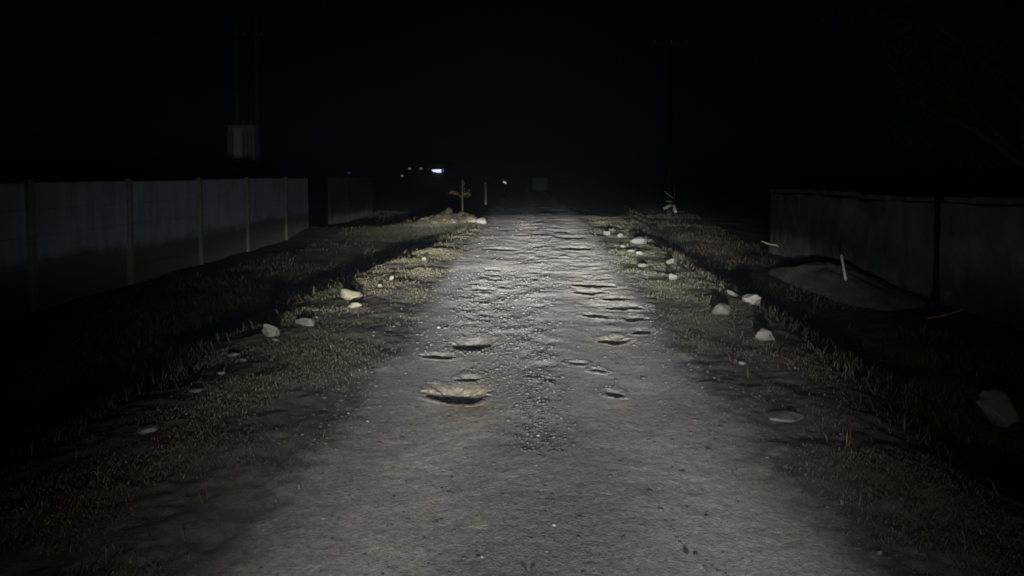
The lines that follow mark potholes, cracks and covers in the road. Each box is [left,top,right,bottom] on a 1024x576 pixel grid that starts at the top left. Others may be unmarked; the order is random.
pothole [442,337,500,353]
pothole [615,314,656,324]
pothole [600,301,650,312]
pothole [562,359,594,367]
pothole [584,365,613,375]
pothole [567,288,615,297]
pothole [449,373,486,384]
pothole [591,334,637,347]
pothole [626,326,658,336]
pothole [576,310,616,320]
pothole [597,387,631,400]
pothole [414,381,501,407]
